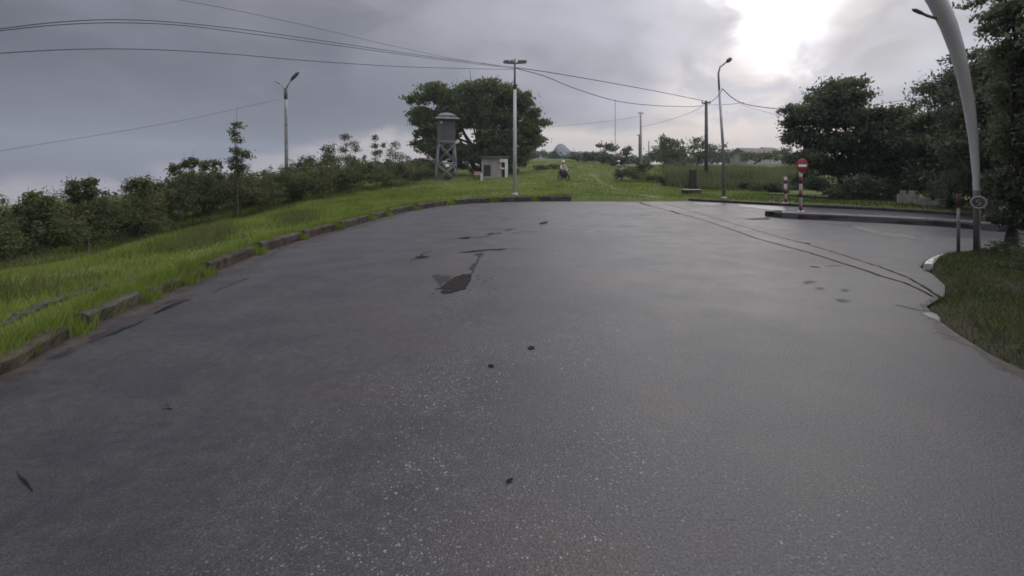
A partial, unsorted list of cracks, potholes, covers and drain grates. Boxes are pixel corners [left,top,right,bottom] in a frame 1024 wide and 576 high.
crack [453,228,517,273]
crack [106,298,191,336]
pothole [441,273,472,293]
